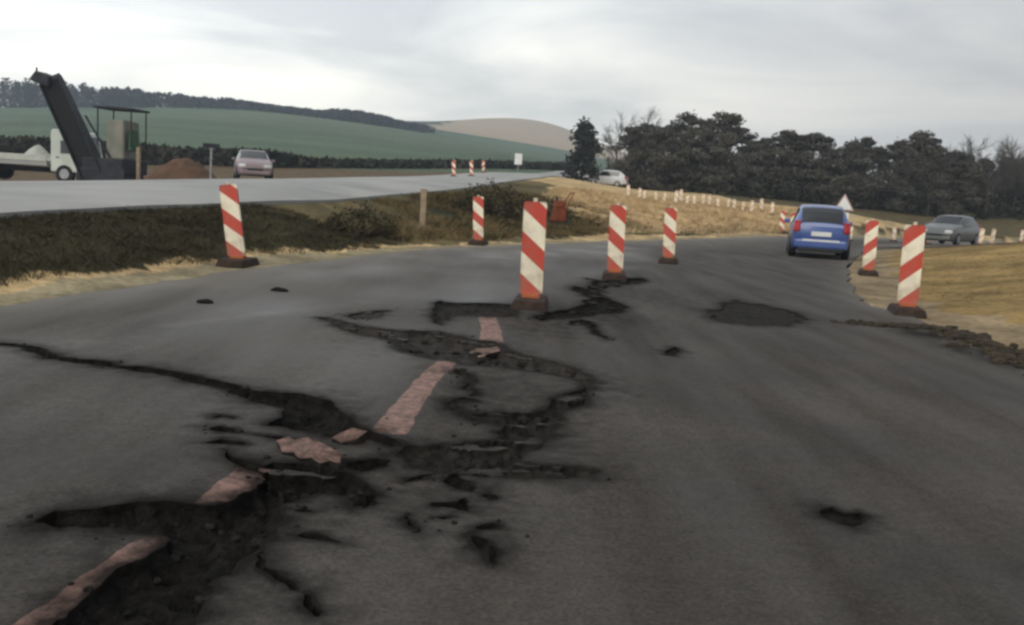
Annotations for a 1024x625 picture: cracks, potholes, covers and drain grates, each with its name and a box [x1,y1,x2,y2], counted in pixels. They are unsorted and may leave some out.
crack [0,278,647,625]
pothole [709,300,808,326]
pothole [820,507,865,527]
